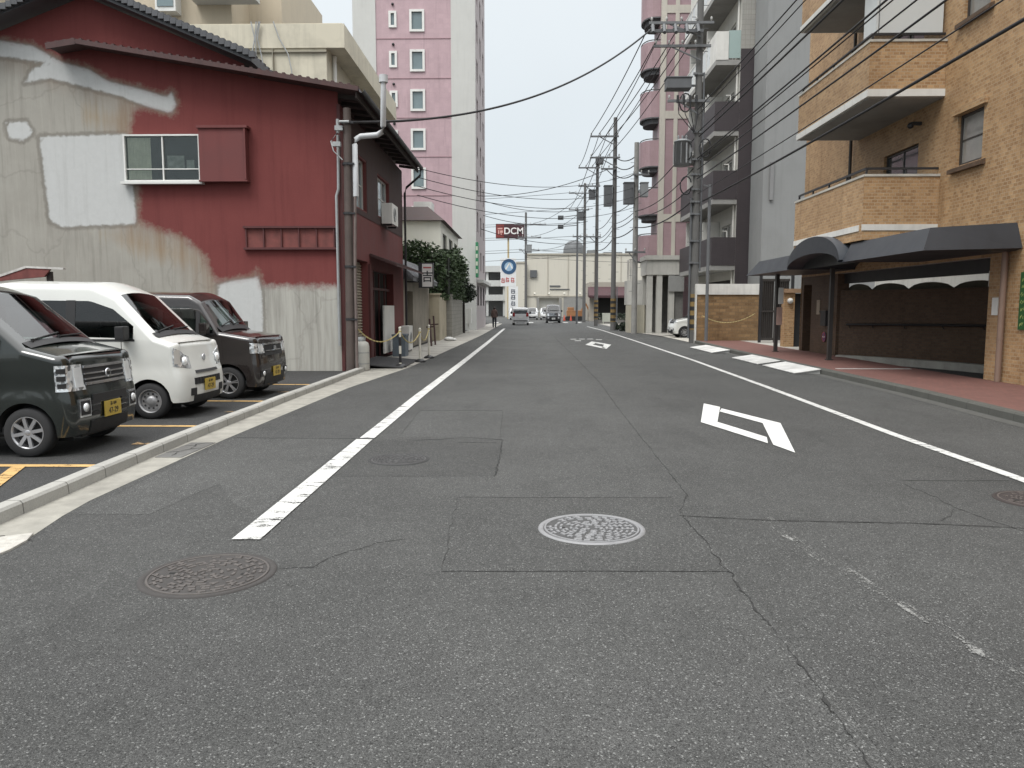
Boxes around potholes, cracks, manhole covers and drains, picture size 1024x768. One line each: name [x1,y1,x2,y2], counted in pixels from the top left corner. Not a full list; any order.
manhole cover [368,453,430,466]
manhole cover [991,491,1024,507]
manhole cover [538,514,646,545]
crack [282,539,402,569]
manhole cover [136,553,277,599]
crack [554,337,1022,768]
